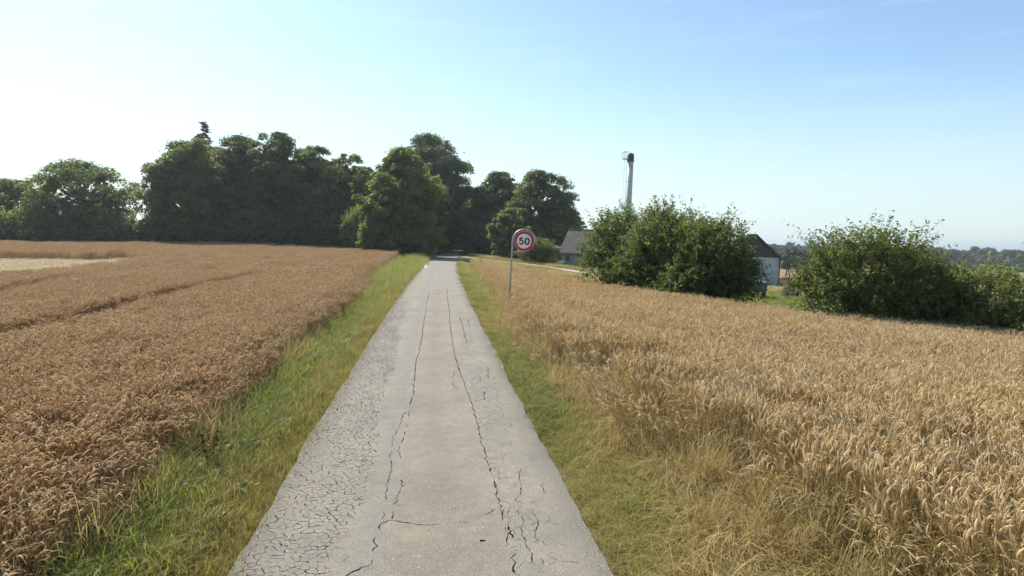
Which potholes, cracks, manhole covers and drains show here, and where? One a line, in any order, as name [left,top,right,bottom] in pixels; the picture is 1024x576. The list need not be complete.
crack [236,299,414,576]
crack [346,289,578,576]
